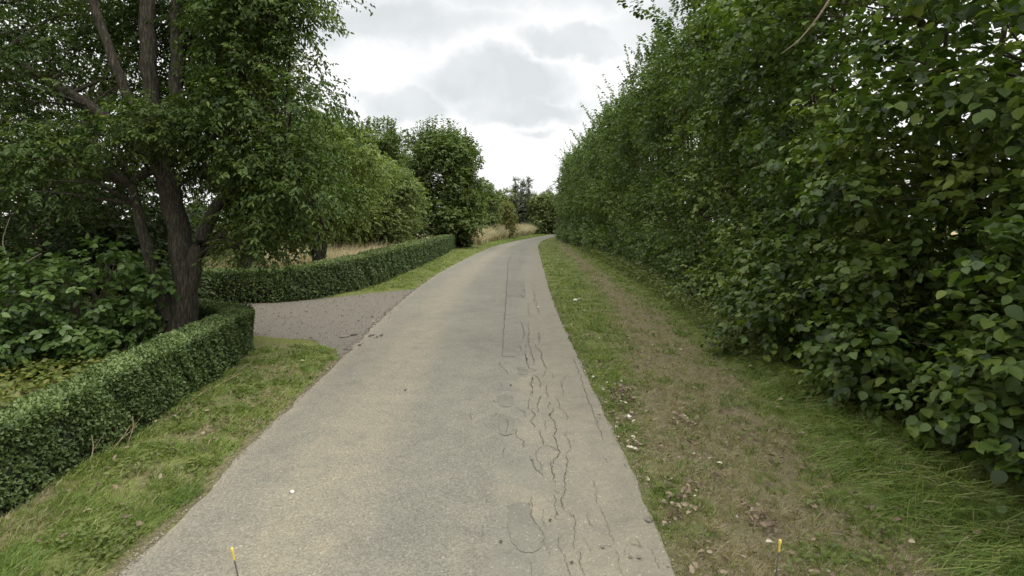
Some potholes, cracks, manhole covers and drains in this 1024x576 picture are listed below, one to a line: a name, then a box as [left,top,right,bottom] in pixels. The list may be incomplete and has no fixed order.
crack [492,287,671,575]
